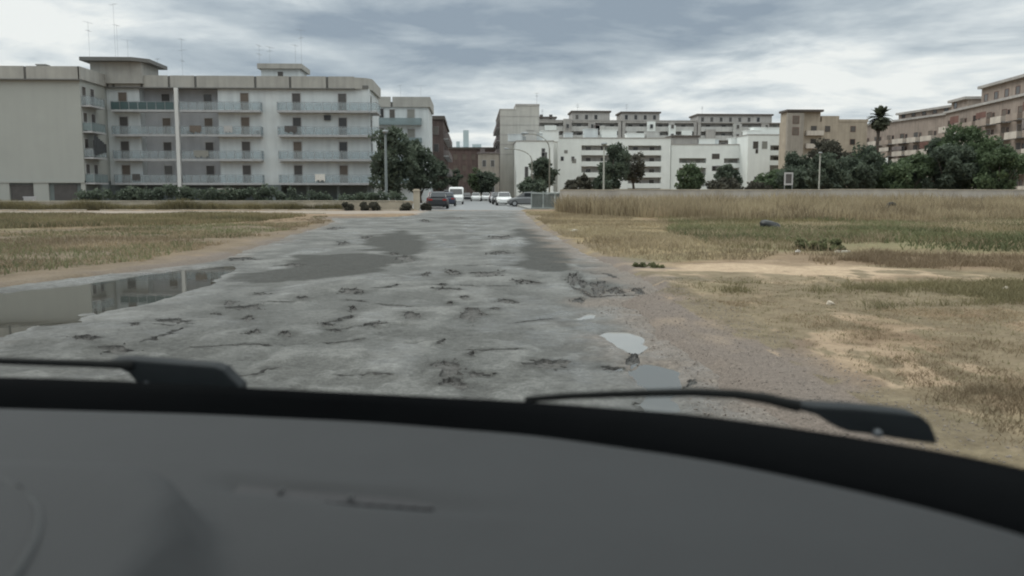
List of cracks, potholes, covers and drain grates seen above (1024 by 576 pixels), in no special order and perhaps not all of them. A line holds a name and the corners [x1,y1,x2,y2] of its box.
pothole [589,281,606,298]
crack [466,348,518,357]
pothole [522,358,571,369]
pothole [459,307,489,322]
pothole [430,361,464,378]
pothole [625,353,640,365]
pothole [438,378,468,390]
